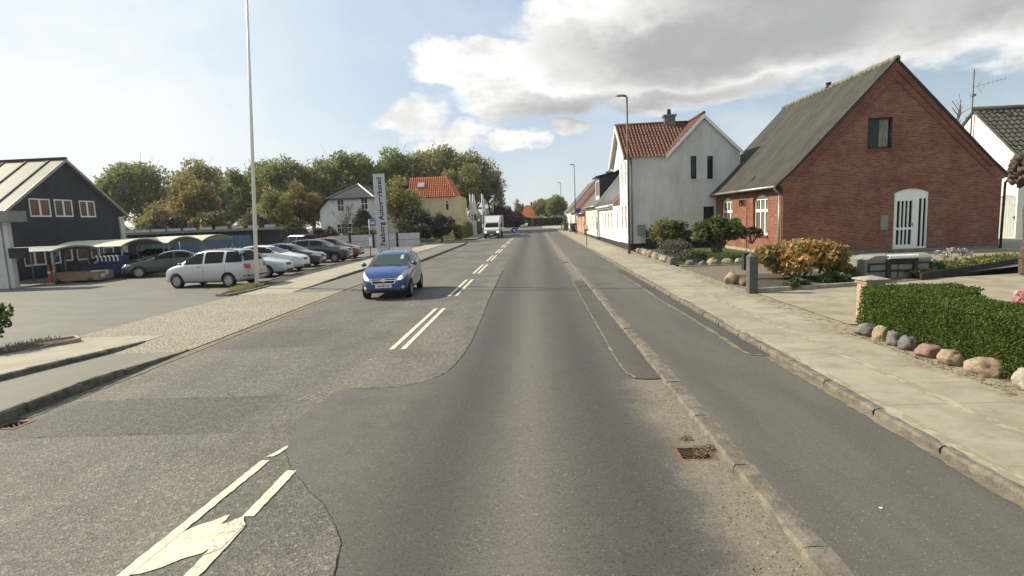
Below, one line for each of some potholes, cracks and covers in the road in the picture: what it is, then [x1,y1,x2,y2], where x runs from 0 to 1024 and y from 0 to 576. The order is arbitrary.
drain grate [670,445,720,462]
drain grate [0,420,36,430]
